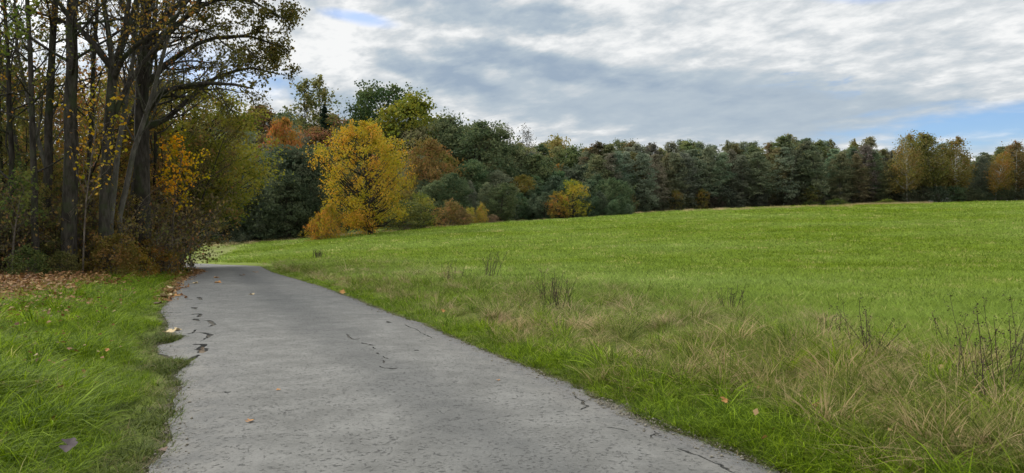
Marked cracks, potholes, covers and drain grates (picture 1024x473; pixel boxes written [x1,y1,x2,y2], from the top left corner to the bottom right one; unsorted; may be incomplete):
crack [187,297,217,341]
crack [650,431,735,473]
